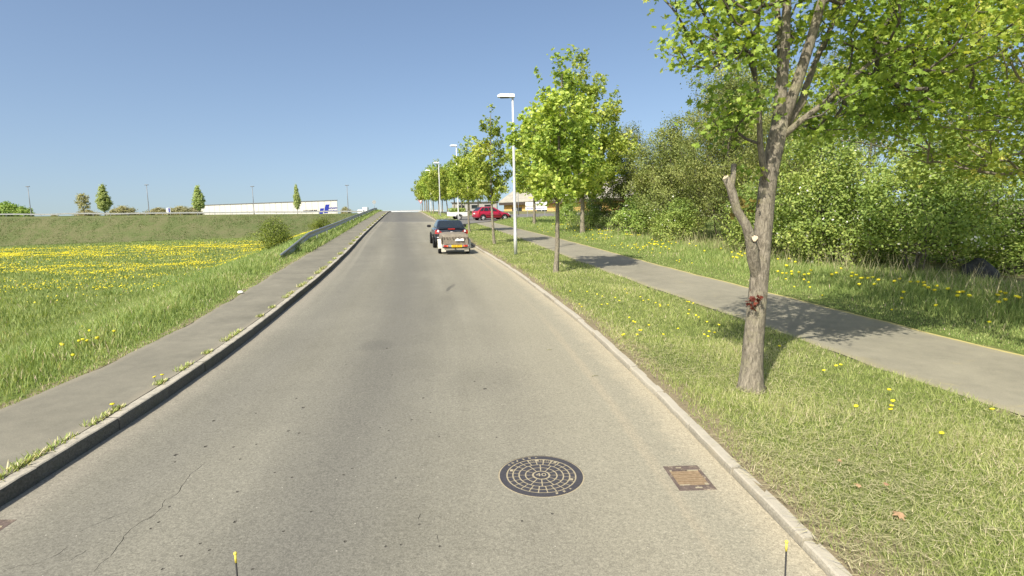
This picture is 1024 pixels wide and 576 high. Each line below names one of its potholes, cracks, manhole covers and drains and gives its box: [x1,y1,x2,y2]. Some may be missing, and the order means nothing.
drain grate [663,465,717,491]
manhole cover [498,456,585,498]
crack [10,466,201,569]
